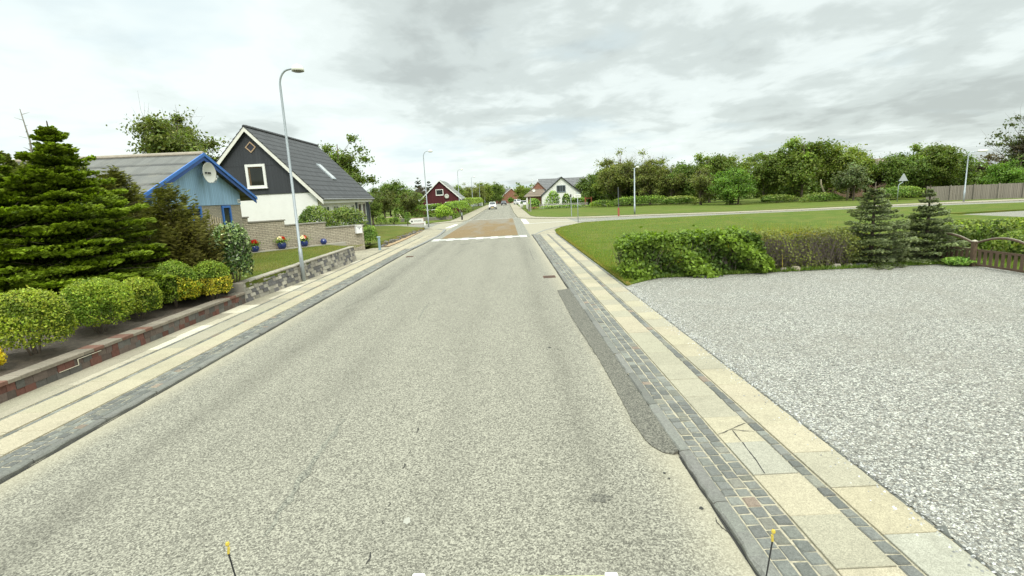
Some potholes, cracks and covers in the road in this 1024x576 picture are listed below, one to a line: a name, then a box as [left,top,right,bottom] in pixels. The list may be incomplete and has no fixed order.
crack [719,423,765,473]
